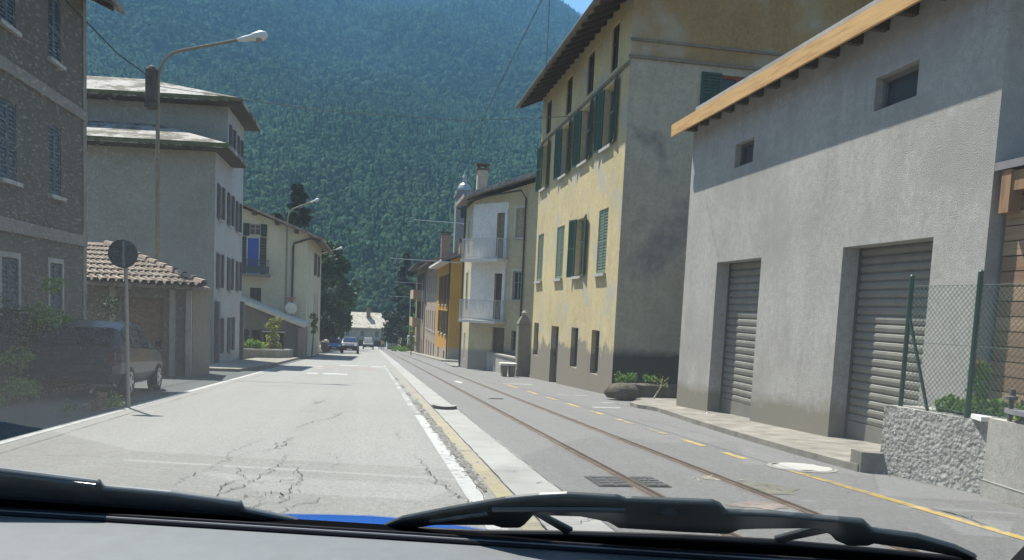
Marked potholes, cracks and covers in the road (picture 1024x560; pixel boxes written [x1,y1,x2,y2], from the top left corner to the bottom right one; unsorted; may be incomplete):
crack [167,384,340,513]
manhole cover [767,462,839,473]
